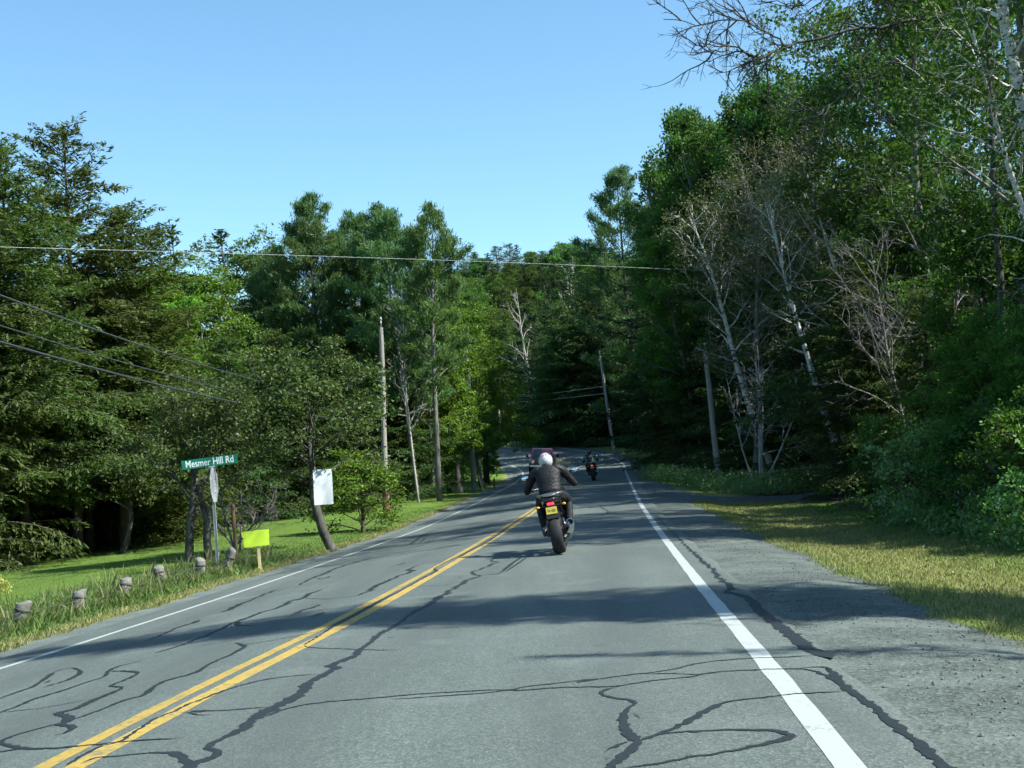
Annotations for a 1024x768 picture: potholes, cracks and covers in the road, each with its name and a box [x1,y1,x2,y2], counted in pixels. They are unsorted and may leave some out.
crack [0,515,839,768]
